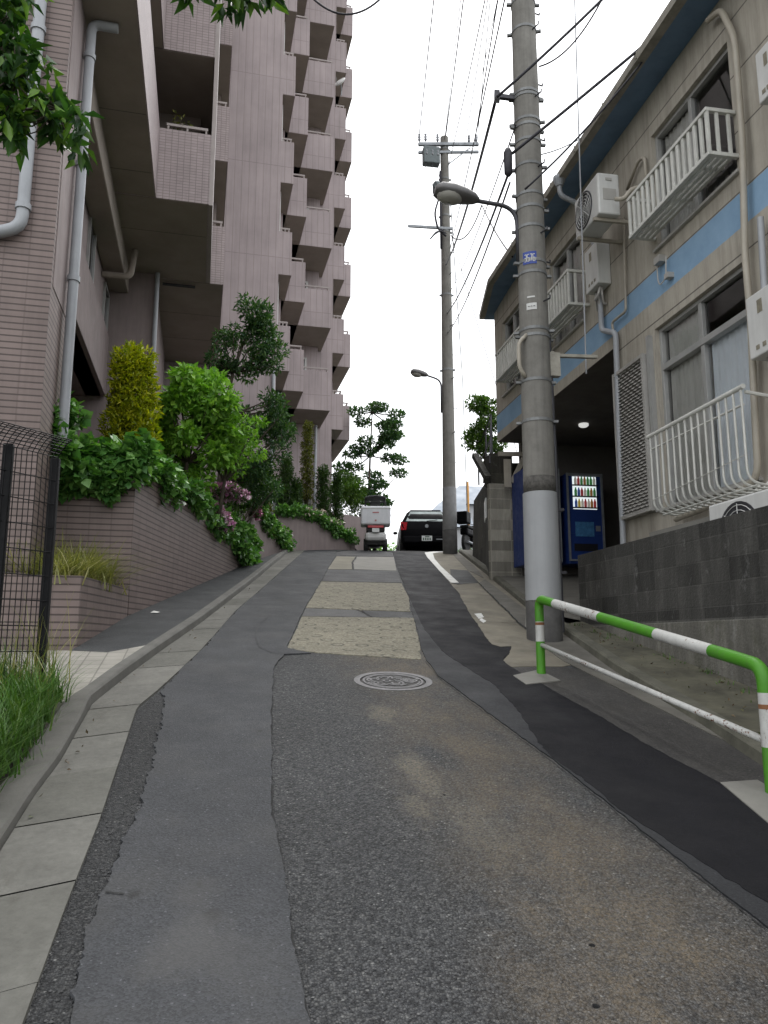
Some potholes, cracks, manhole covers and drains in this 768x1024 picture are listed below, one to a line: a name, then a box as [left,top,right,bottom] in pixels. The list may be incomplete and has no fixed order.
manhole cover [354,672,432,691]
